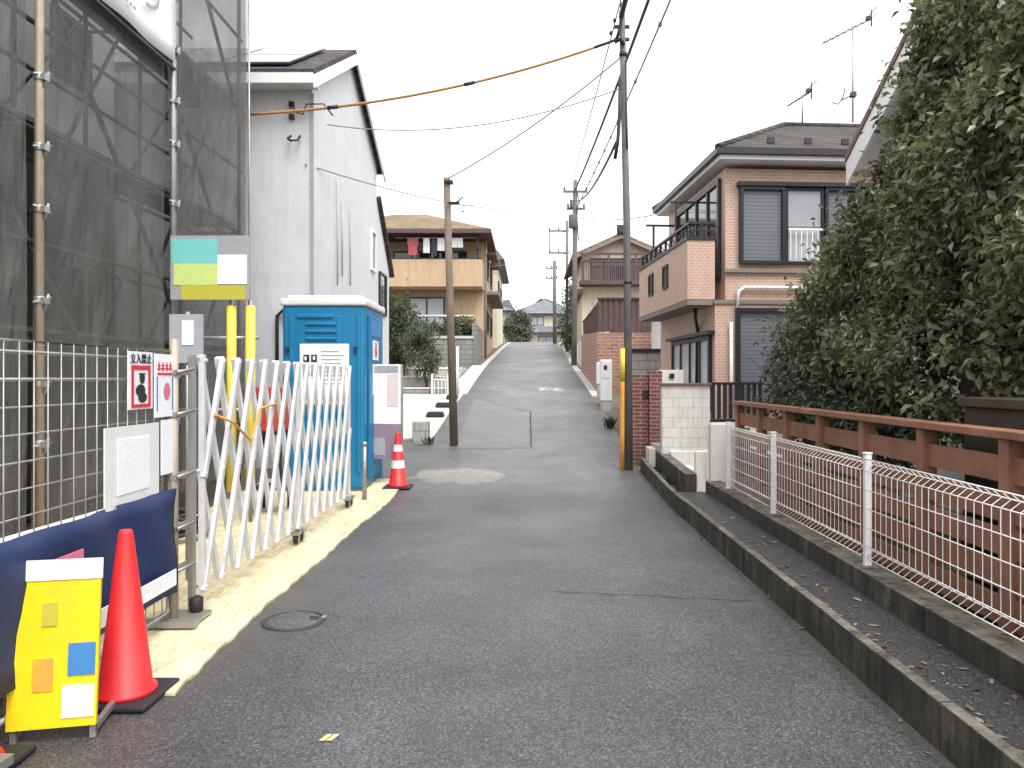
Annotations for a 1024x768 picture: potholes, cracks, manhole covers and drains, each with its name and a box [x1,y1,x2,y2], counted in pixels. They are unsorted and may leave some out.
manhole cover [261,610,327,631]
